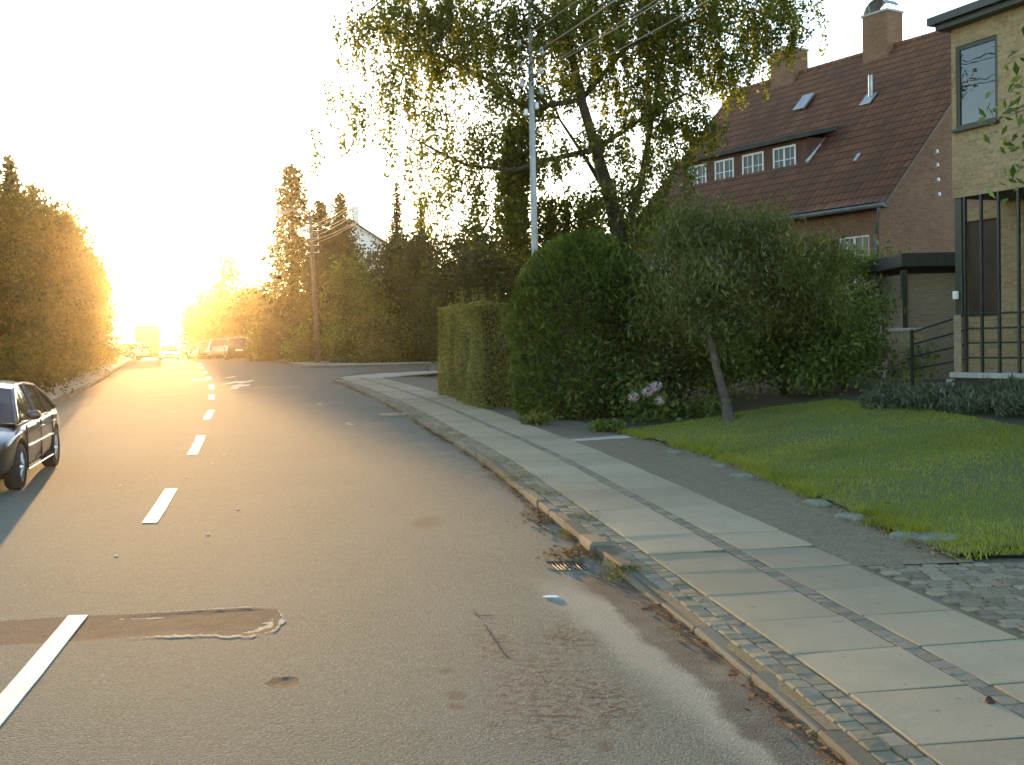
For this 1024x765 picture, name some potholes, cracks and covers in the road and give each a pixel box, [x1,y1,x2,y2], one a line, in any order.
pothole [264,677,300,688]
drain grate [547,561,592,570]
